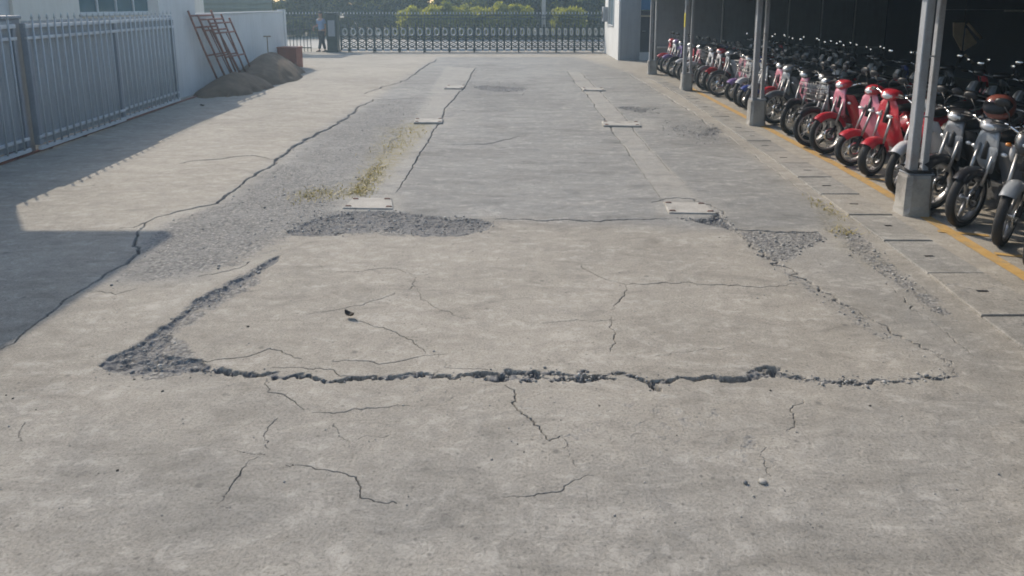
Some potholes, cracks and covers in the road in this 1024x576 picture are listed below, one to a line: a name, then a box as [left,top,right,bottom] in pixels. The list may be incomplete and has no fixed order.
crack [369,68,502,192]
pothole [287,210,493,237]
crack [1,60,436,349]
crack [185,268,959,508]
crack [554,230,975,371]
manhole cover [663,202,717,216]
manhole cover [343,198,394,210]
